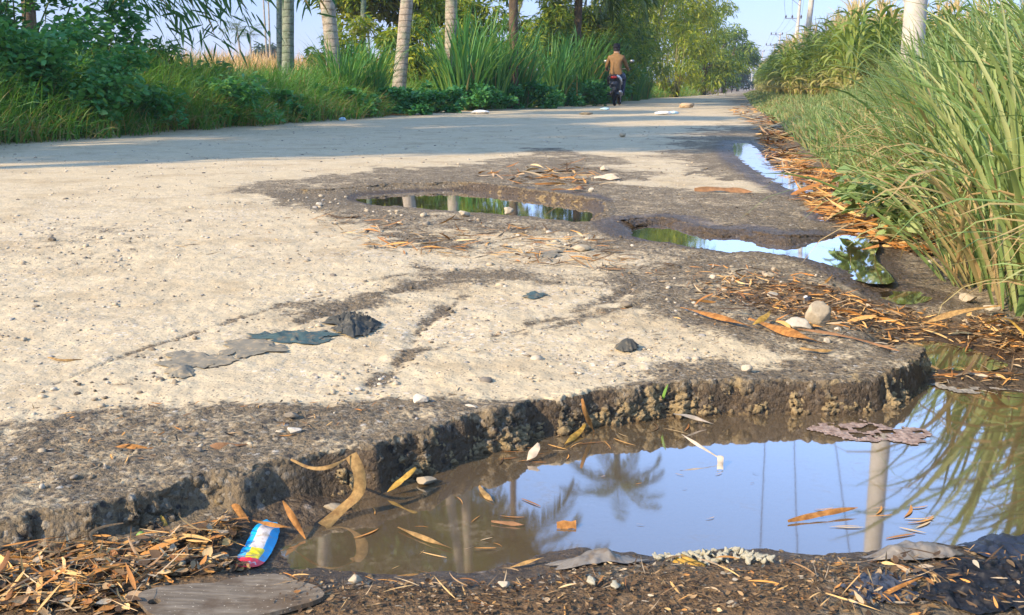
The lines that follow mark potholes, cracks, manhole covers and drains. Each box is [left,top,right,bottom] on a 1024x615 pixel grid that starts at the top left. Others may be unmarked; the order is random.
pothole [0,343,1024,615]
pothole [268,181,618,226]
pothole [605,216,898,297]
